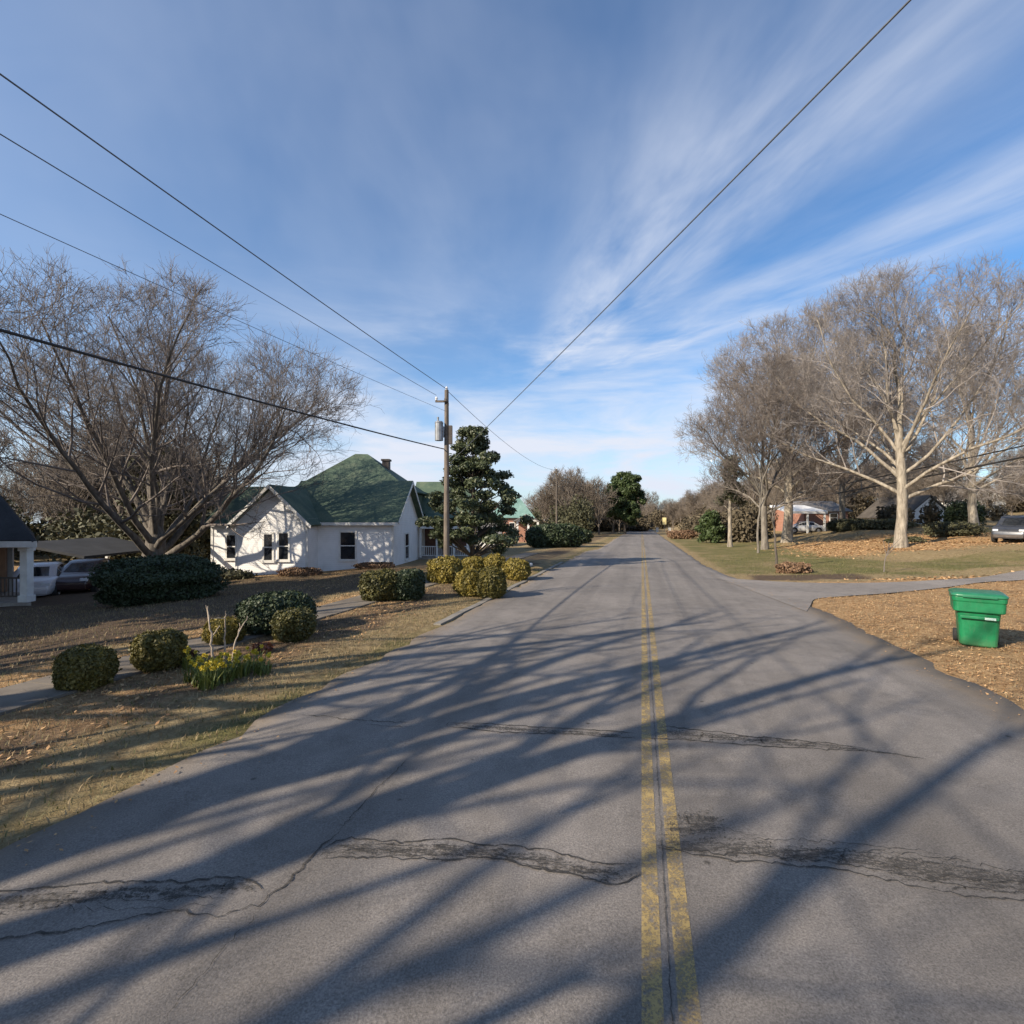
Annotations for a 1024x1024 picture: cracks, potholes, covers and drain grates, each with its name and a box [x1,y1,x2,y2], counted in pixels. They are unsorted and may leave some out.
crack [654,805,1024,901]
crack [644,726,925,759]
crack [0,758,641,1019]
crack [446,722,636,738]
